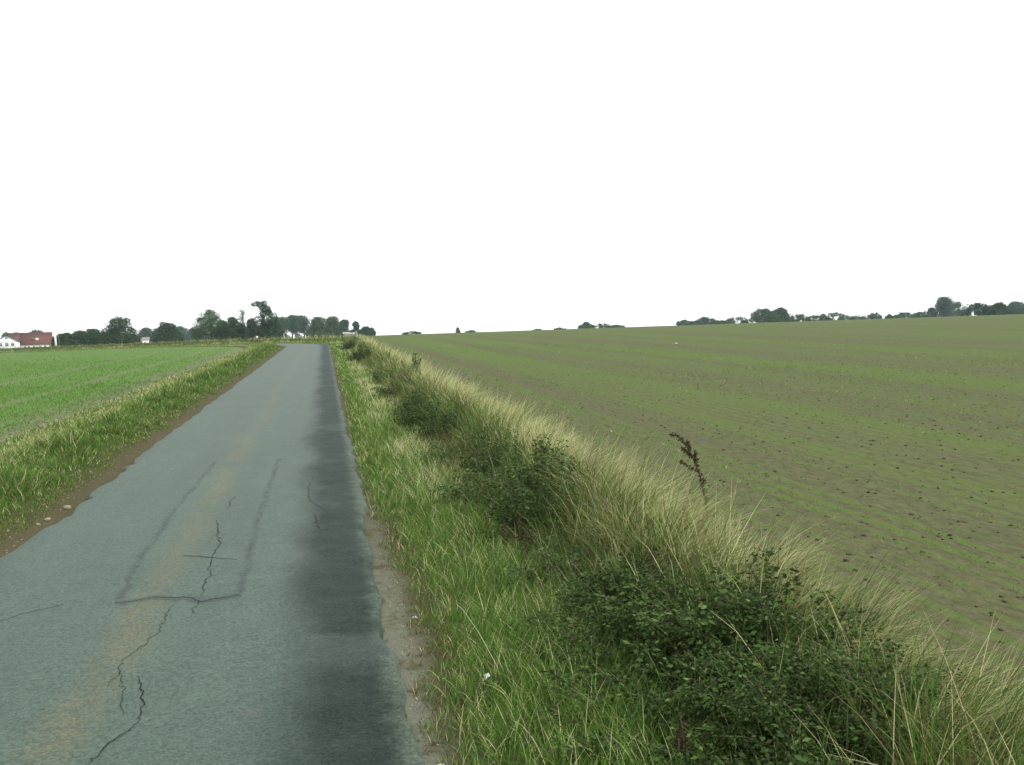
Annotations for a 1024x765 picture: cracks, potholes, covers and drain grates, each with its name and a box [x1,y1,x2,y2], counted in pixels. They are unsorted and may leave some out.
crack [87,496,239,765]
